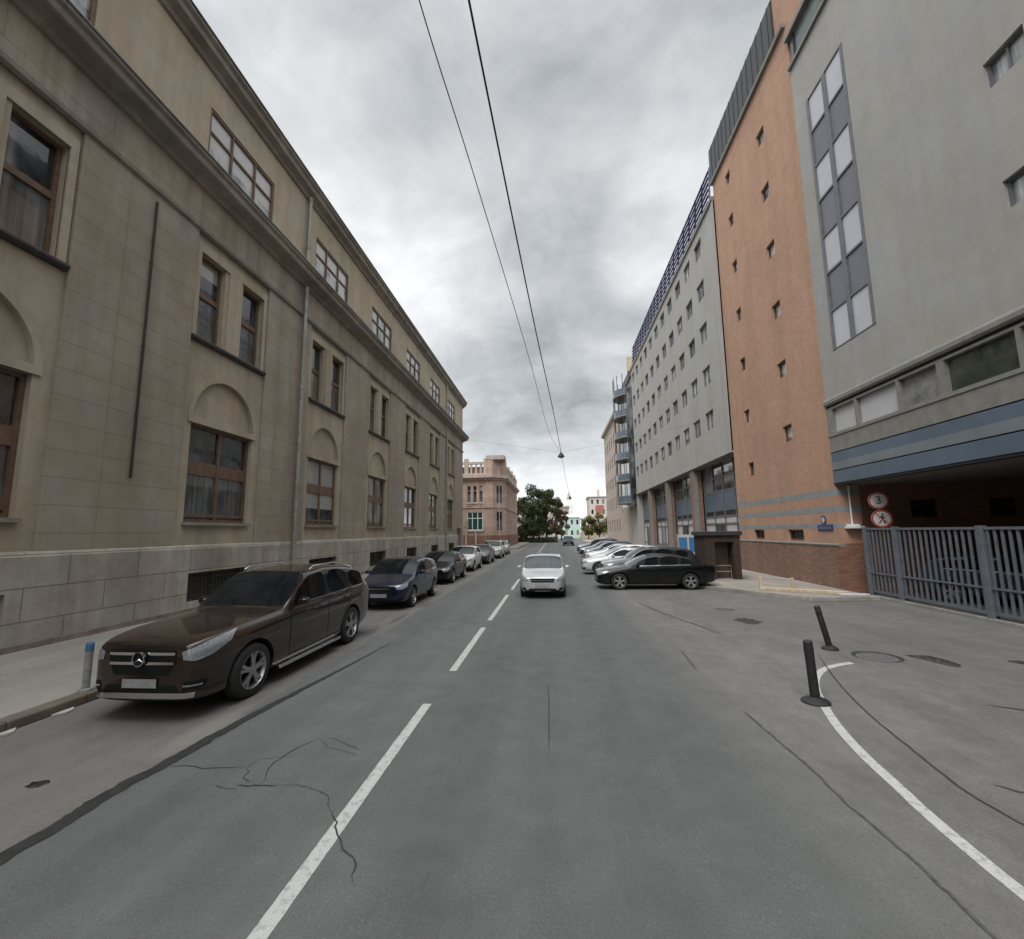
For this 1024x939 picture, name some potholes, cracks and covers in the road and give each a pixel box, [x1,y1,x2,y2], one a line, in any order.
pothole [25,780,50,789]
manhole cover [851,651,905,663]
crack [166,738,358,881]
